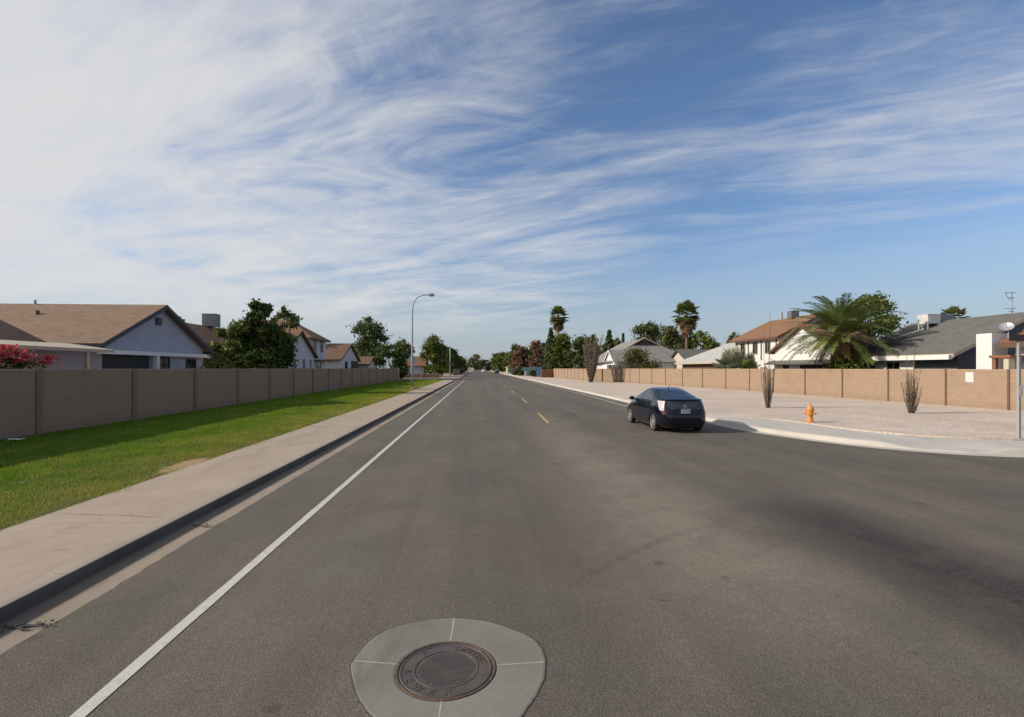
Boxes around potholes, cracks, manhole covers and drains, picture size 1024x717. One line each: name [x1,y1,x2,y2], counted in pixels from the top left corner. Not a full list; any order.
manhole cover [350,618,546,717]
crack [0,619,54,632]
